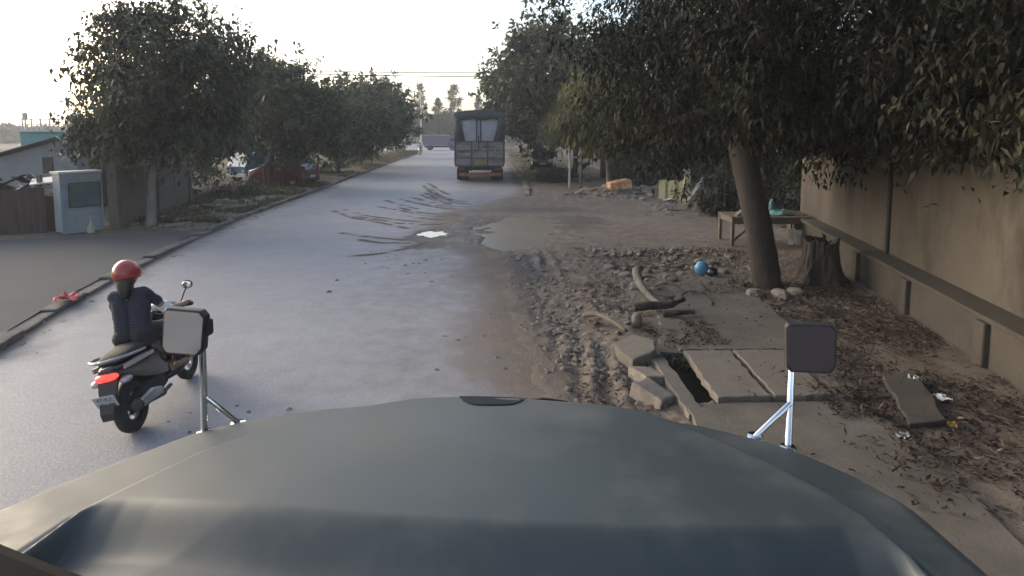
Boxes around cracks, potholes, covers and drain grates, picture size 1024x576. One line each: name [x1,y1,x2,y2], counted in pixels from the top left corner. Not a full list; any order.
pothole [410,228,457,239]
